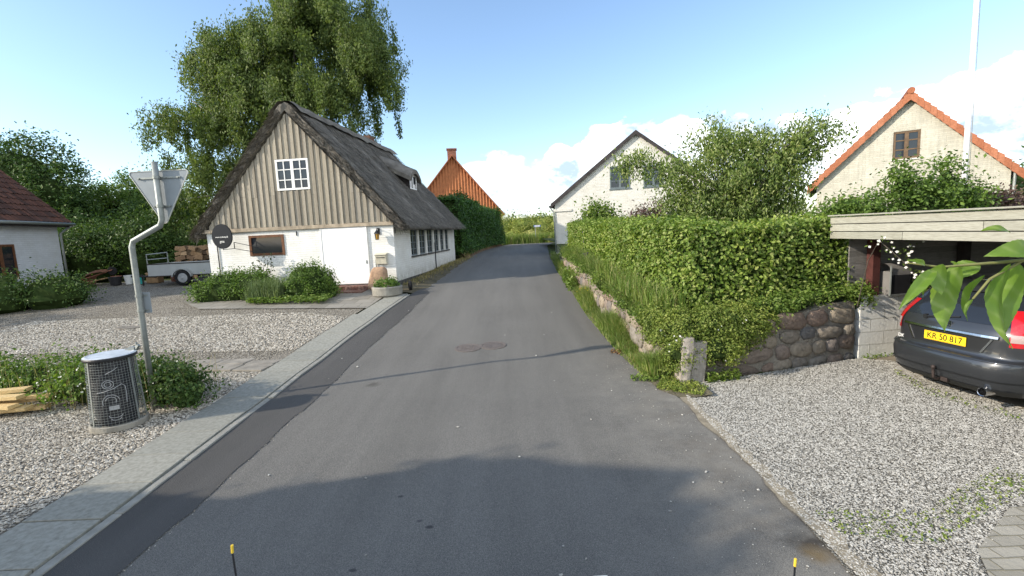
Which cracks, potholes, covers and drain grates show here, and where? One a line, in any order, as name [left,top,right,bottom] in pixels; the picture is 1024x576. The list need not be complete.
manhole cover [455,344,481,352]
manhole cover [480,341,506,350]
